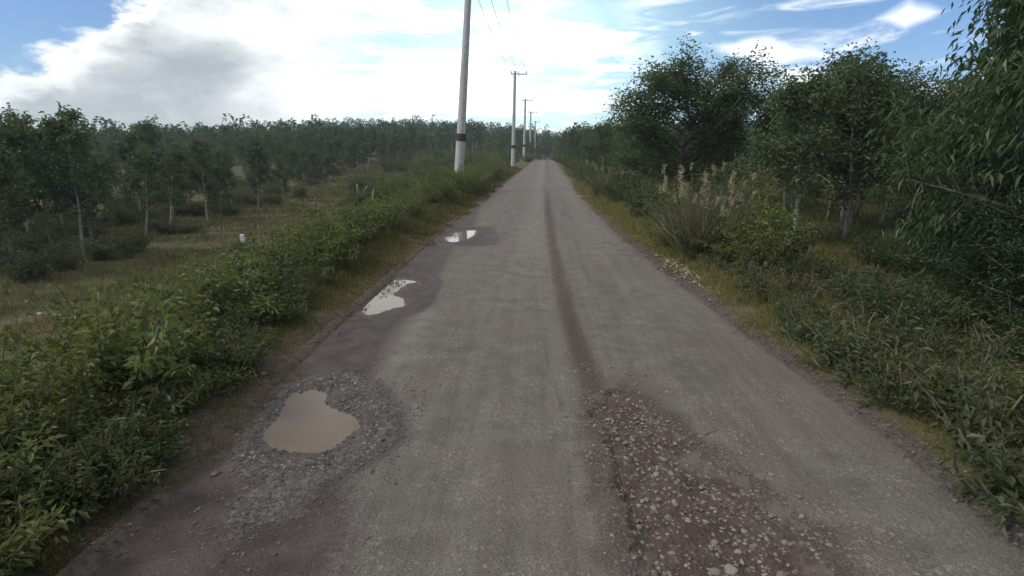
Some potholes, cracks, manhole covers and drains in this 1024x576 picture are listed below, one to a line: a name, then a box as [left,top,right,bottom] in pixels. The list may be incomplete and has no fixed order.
pothole [240,376,386,475]
pothole [354,275,430,320]
pothole [586,388,835,576]
pothole [435,227,488,245]
